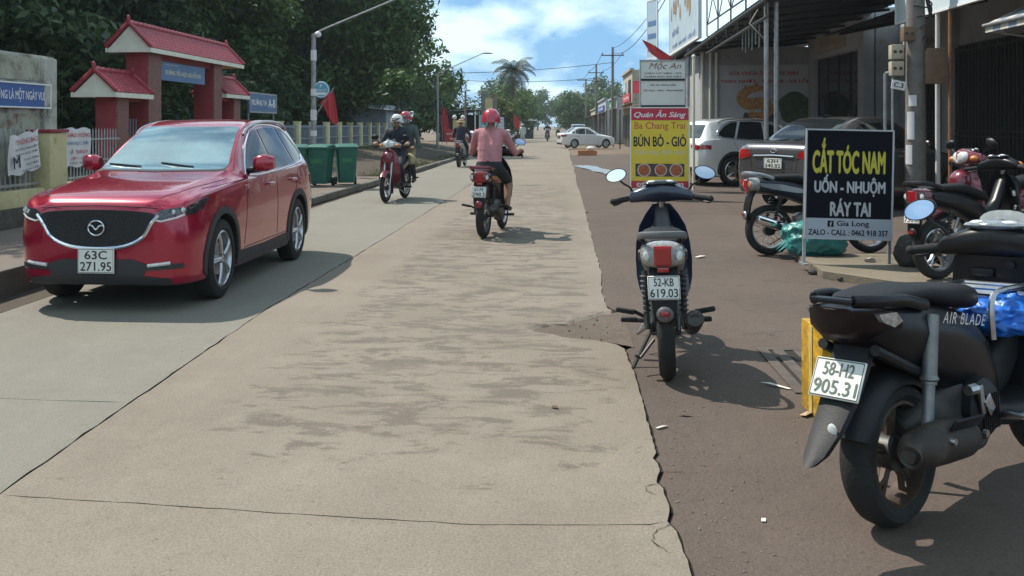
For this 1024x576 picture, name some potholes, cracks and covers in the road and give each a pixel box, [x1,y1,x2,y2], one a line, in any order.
drain grate [756,347,802,394]
crack [625,350,694,576]
